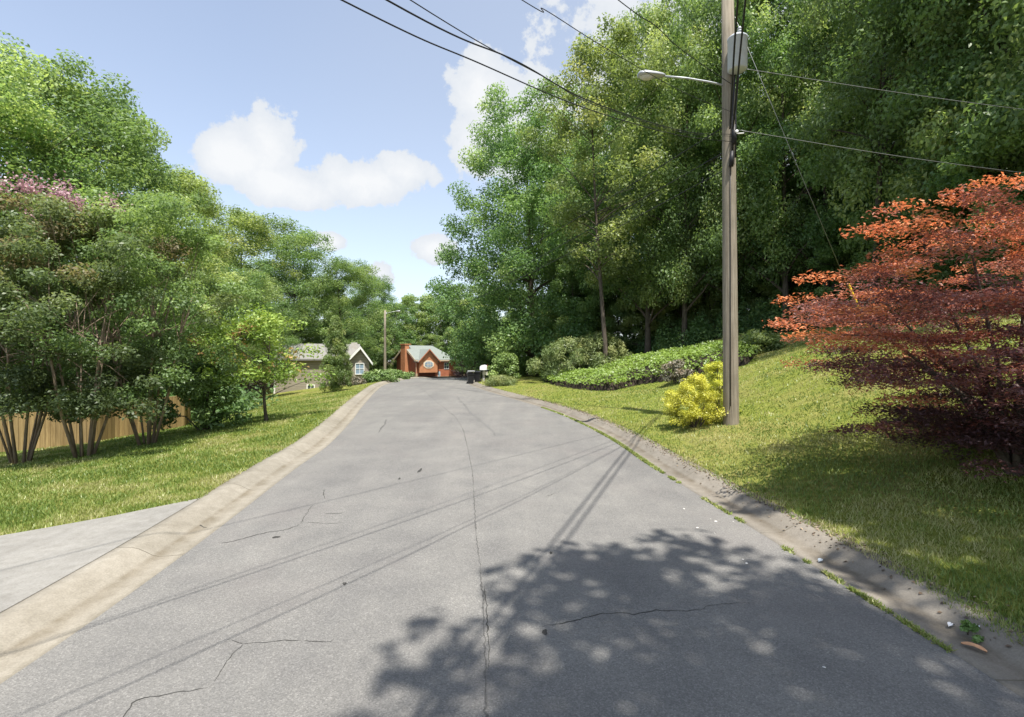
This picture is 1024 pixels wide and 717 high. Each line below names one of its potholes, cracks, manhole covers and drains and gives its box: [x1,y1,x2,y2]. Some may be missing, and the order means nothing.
crack [222,492,344,543]
crack [123,640,331,717]
crack [554,602,739,625]
